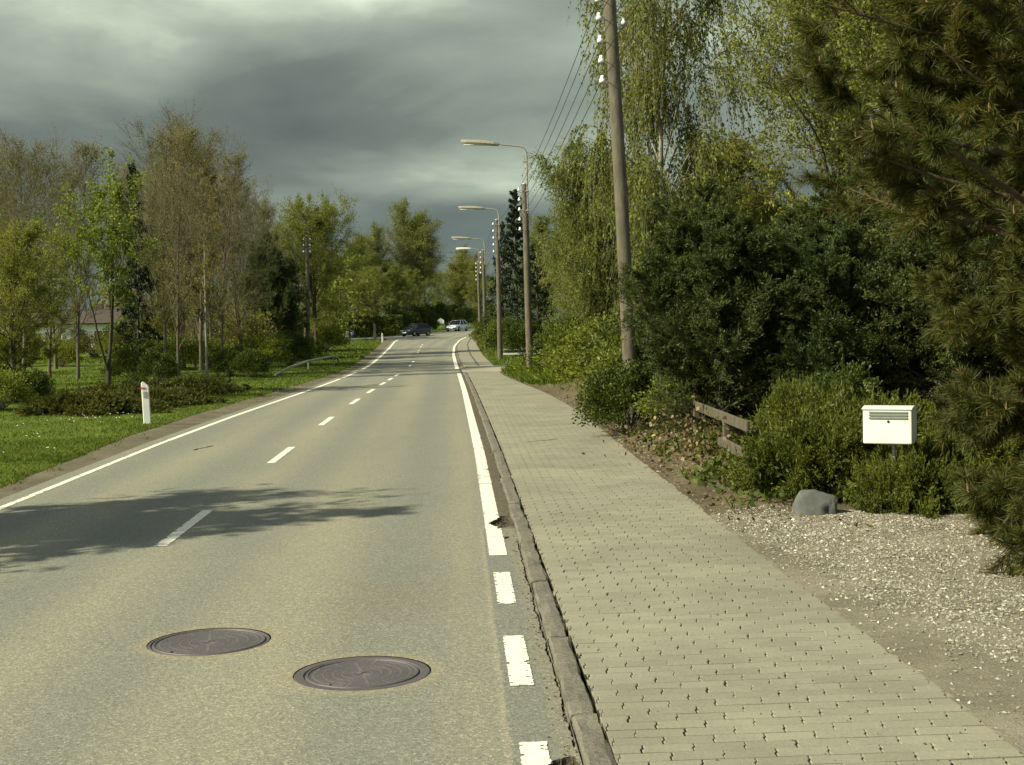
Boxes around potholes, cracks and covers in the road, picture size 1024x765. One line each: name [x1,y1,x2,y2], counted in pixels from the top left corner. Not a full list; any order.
manhole cover [147,628,271,656]
crack [516,541,576,747]
manhole cover [293,656,431,691]
pothole [489,516,511,529]
pothole [548,755,580,765]
